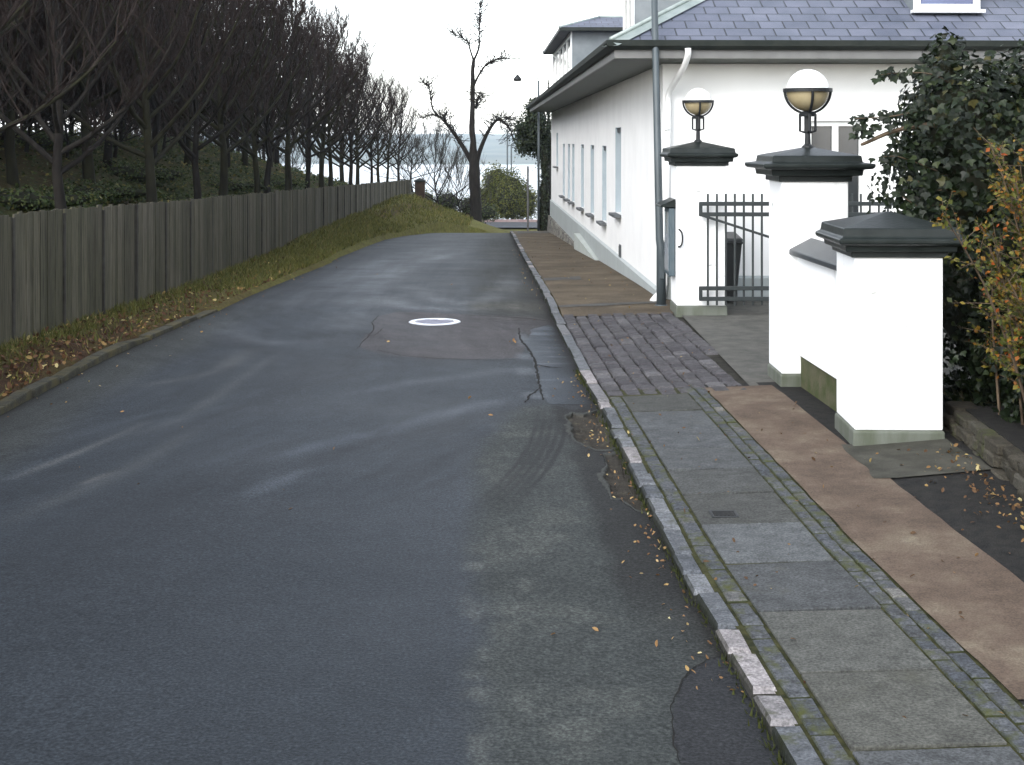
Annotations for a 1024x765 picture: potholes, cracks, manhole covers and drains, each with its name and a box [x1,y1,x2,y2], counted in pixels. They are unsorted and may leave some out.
crack [359,315,559,402]
manhole cover [409,318,461,326]
crack [670,655,725,763]
pothole [563,410,618,451]
pothole [597,451,653,516]
